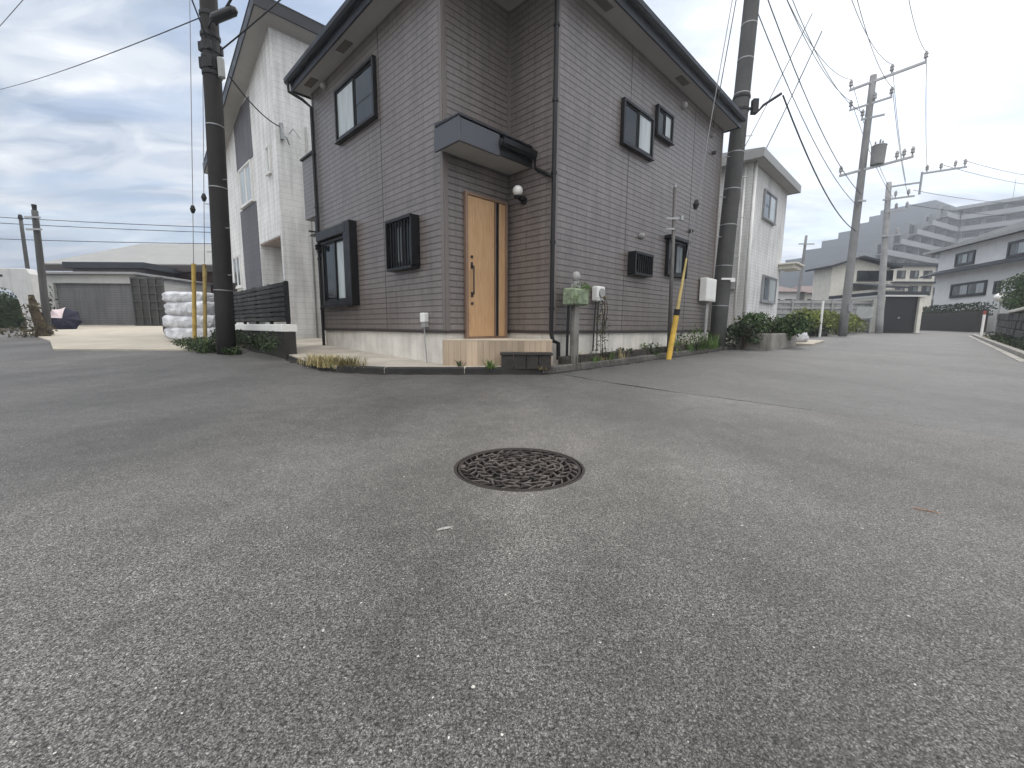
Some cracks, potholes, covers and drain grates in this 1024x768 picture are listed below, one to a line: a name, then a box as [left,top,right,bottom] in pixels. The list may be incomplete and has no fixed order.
manhole cover [454,448,585,492]
